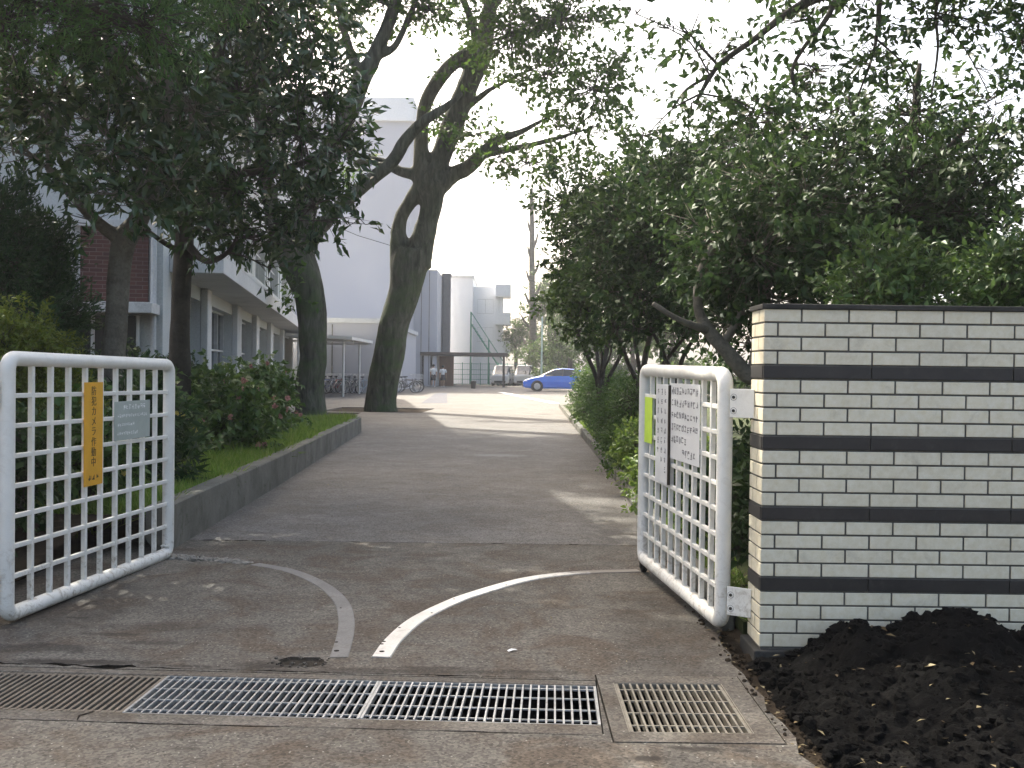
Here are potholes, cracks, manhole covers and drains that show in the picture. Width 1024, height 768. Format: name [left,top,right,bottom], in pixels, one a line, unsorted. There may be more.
drain grate [122,676,380,719]
drain grate [615,683,752,733]
drain grate [360,681,601,725]
drain grate [0,672,167,713]
pothole [267,656,330,668]
